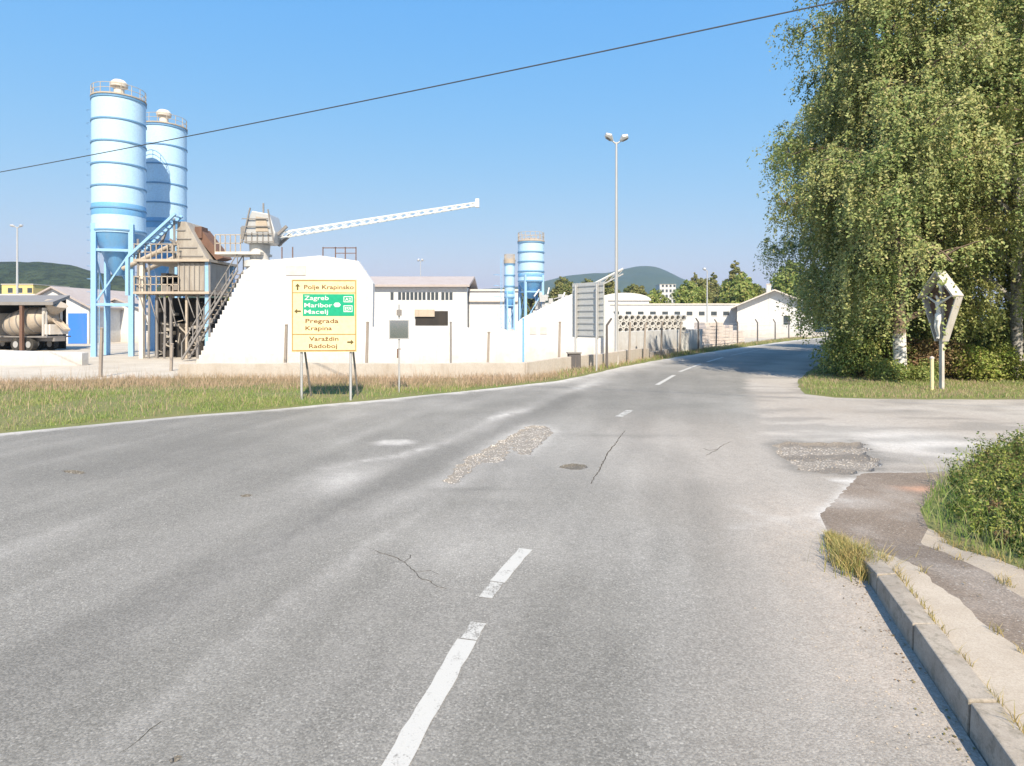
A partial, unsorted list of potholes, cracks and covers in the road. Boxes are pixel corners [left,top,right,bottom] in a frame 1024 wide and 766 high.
crack [367,547,446,589]
pothole [772,441,883,475]
pothole [442,425,554,484]
crack [591,433,623,483]
